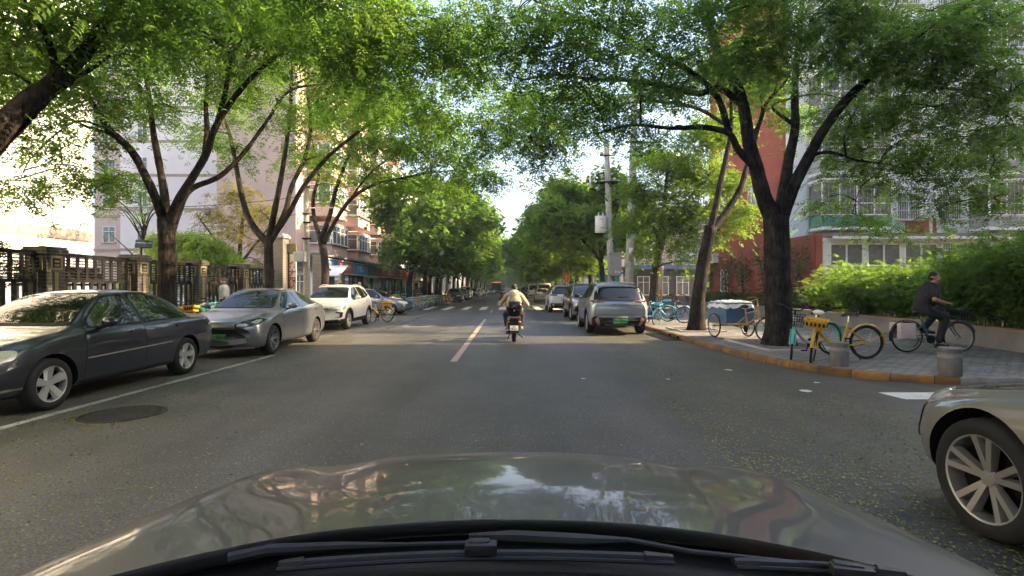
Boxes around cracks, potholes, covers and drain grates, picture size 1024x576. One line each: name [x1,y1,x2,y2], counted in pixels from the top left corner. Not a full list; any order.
manhole cover [75,405,169,424]
